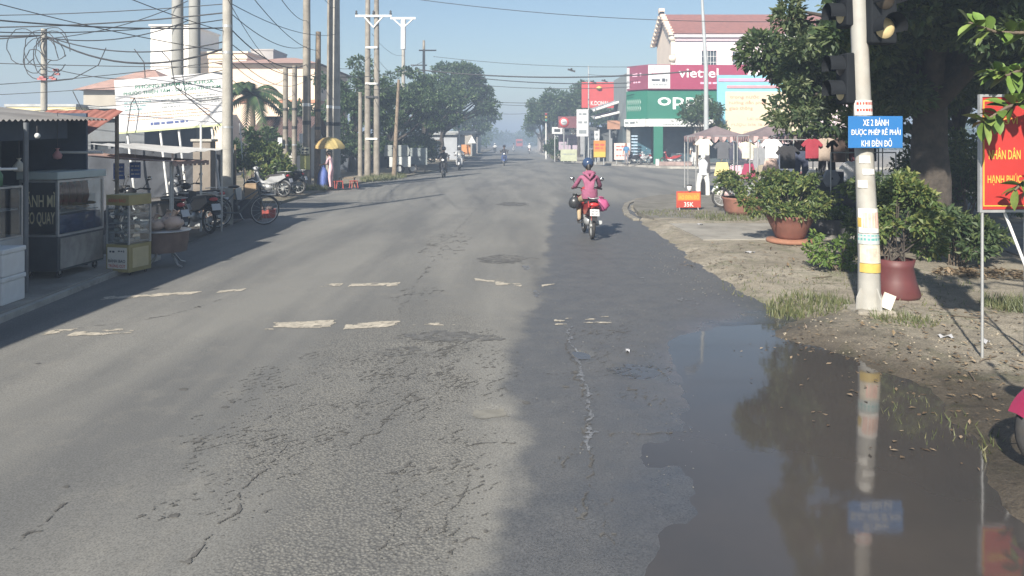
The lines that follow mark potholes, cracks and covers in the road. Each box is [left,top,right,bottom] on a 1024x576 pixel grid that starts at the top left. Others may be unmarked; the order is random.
crack [138,330,519,564]
crack [9,502,67,550]
crack [547,316,700,544]
